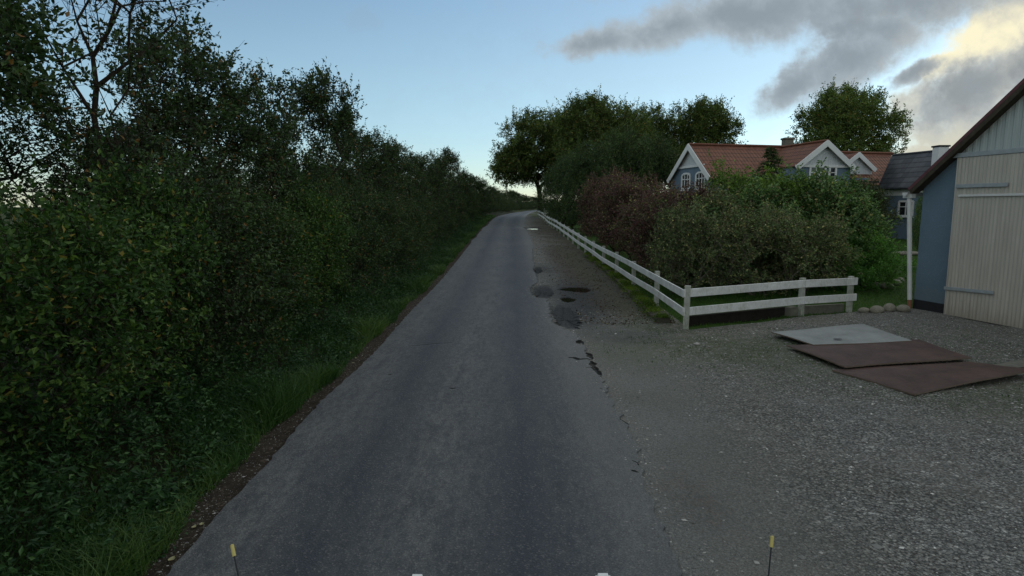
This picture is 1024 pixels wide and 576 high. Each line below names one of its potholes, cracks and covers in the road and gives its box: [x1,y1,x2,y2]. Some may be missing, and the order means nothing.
pothole [530,284,555,299]
crack [569,353,602,375]
pothole [549,305,583,330]
